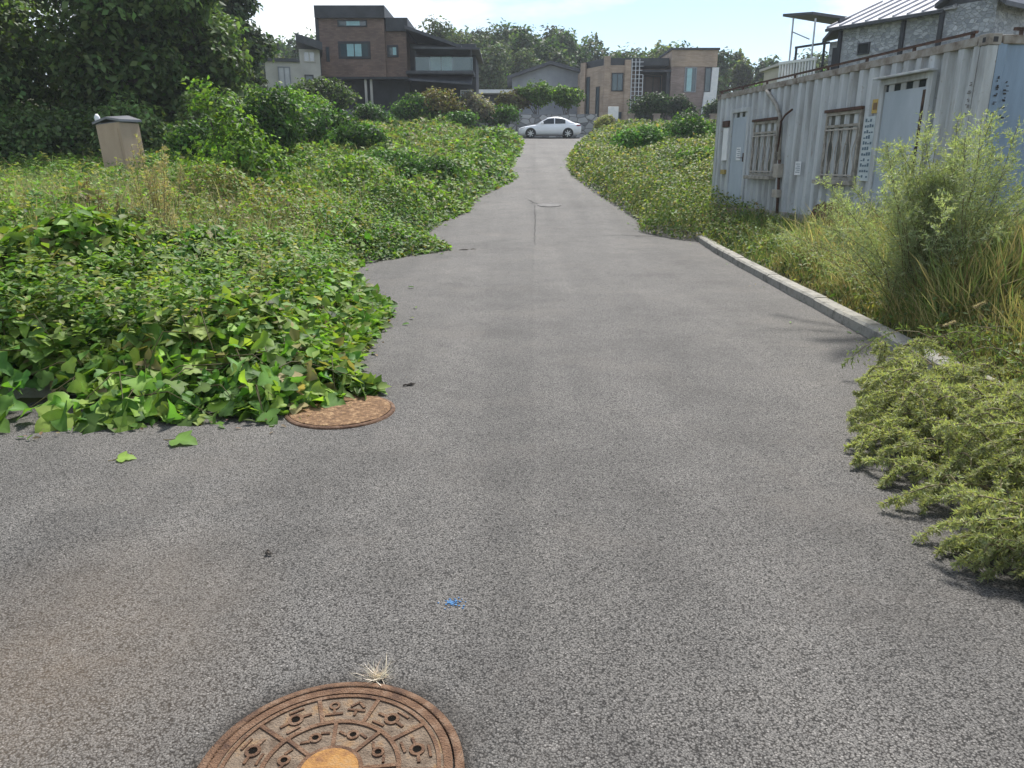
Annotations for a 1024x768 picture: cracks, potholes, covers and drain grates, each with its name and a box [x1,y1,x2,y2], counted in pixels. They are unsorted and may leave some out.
manhole cover [285,395,395,430]
manhole cover [197,682,465,768]
